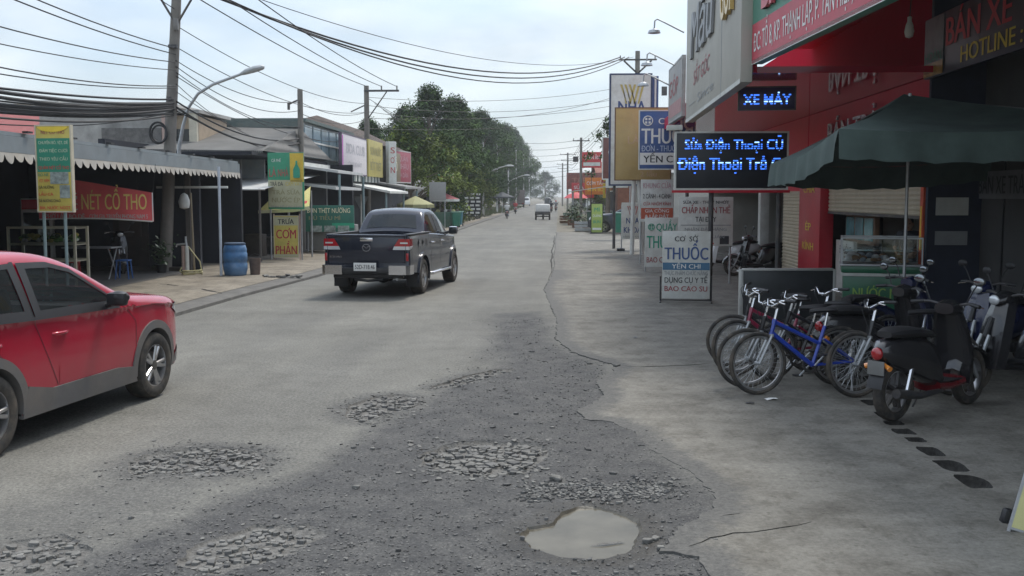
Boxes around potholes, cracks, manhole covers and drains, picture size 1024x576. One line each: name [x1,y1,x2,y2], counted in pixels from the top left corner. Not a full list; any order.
pothole [424,364,519,394]
pothole [318,391,435,427]
crack [690,513,810,546]
pothole [0,524,130,576]
pothole [395,433,570,487]
pothole [169,514,348,575]
pothole [93,439,304,485]
pothole [519,506,642,560]
